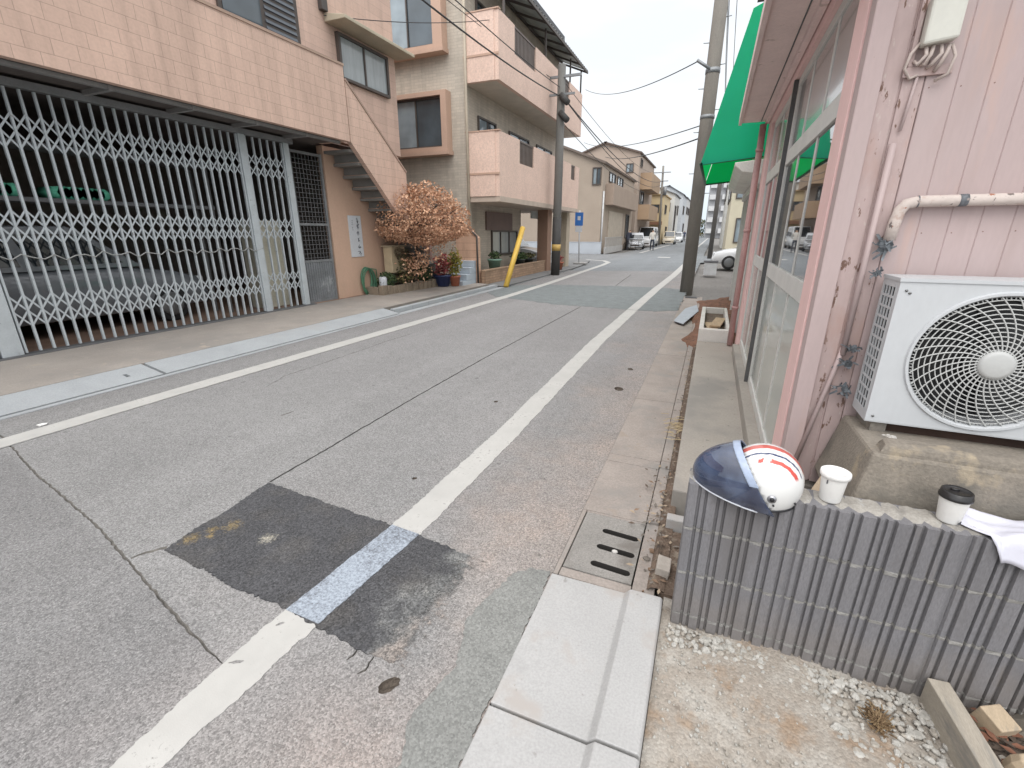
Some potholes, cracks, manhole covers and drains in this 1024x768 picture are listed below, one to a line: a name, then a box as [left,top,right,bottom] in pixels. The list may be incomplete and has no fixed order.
crack [0,436,223,664]
crack [347,650,374,674]
